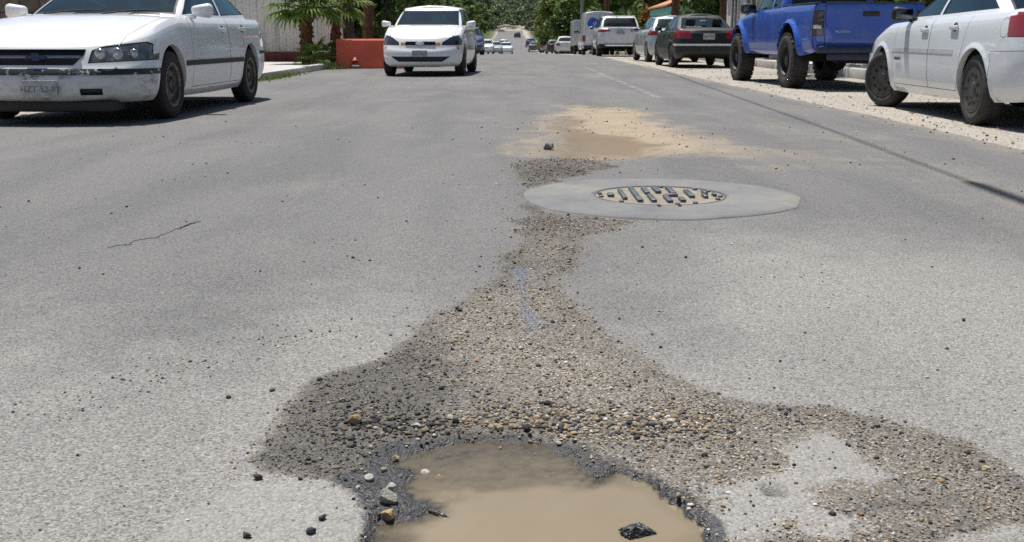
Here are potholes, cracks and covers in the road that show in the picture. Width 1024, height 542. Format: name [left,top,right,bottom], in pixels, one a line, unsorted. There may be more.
manhole cover [523,179,802,221]
crack [107,221,201,248]
pothole [328,423,741,542]
